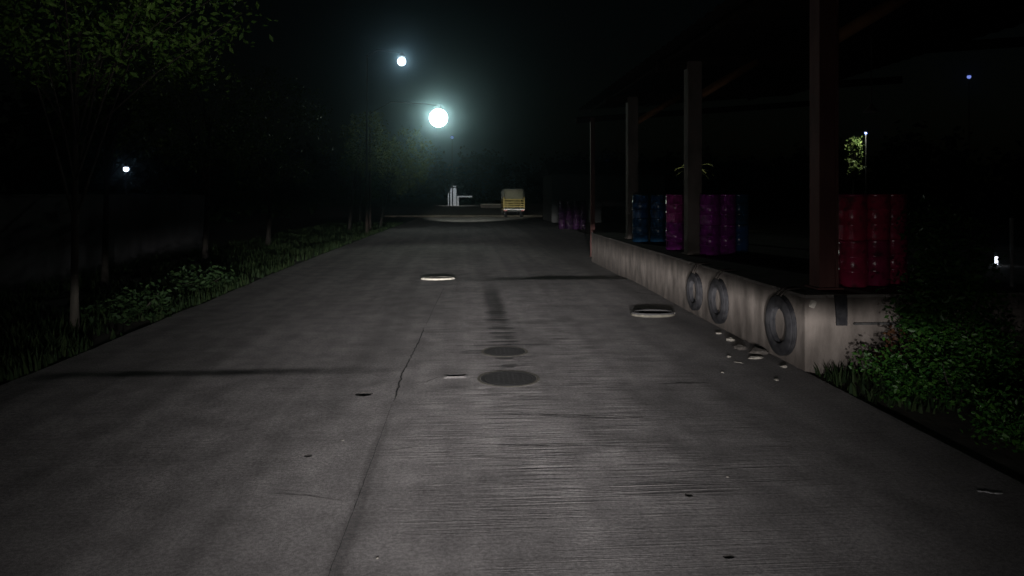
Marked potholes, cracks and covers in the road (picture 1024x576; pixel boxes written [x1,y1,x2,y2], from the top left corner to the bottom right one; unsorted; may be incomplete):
crack [275,288,444,576]
manhole cover [477,370,540,387]
manhole cover [631,309,675,318]
manhole cover [481,346,528,357]
